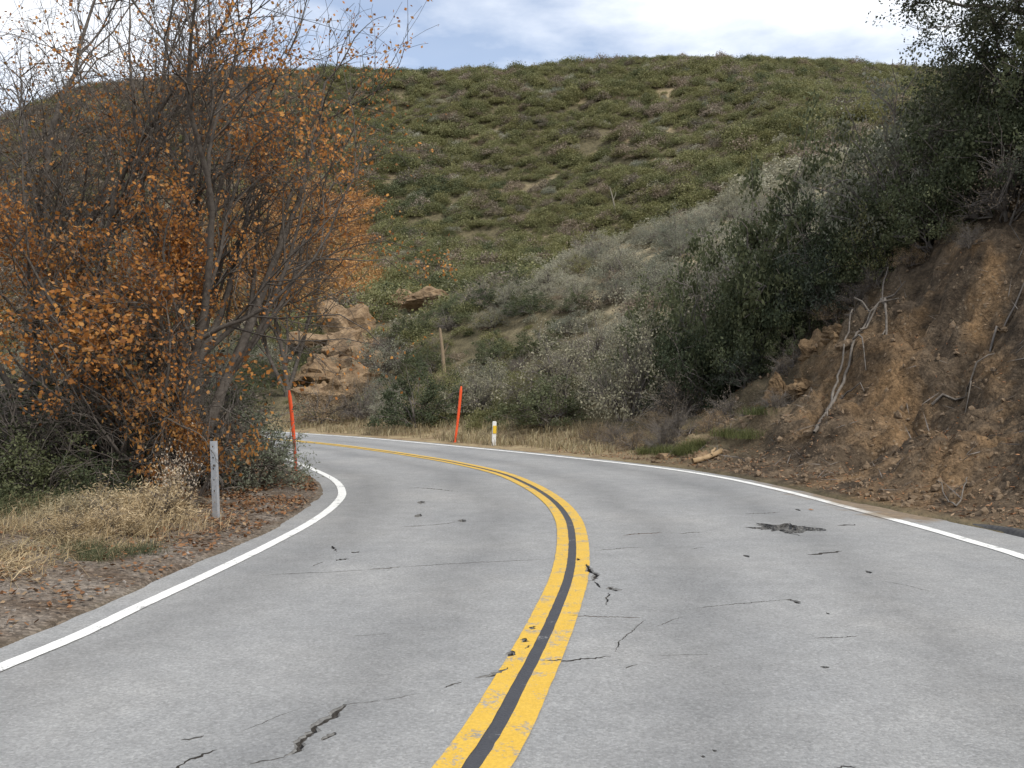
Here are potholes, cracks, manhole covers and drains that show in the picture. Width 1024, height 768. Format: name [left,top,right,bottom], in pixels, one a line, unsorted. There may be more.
crack [561,532,681,668]
crack [446,627,534,688]
crack [251,701,373,764]
crack [703,599,801,608]
pothole [746,523,826,535]
crack [176,736,215,768]
